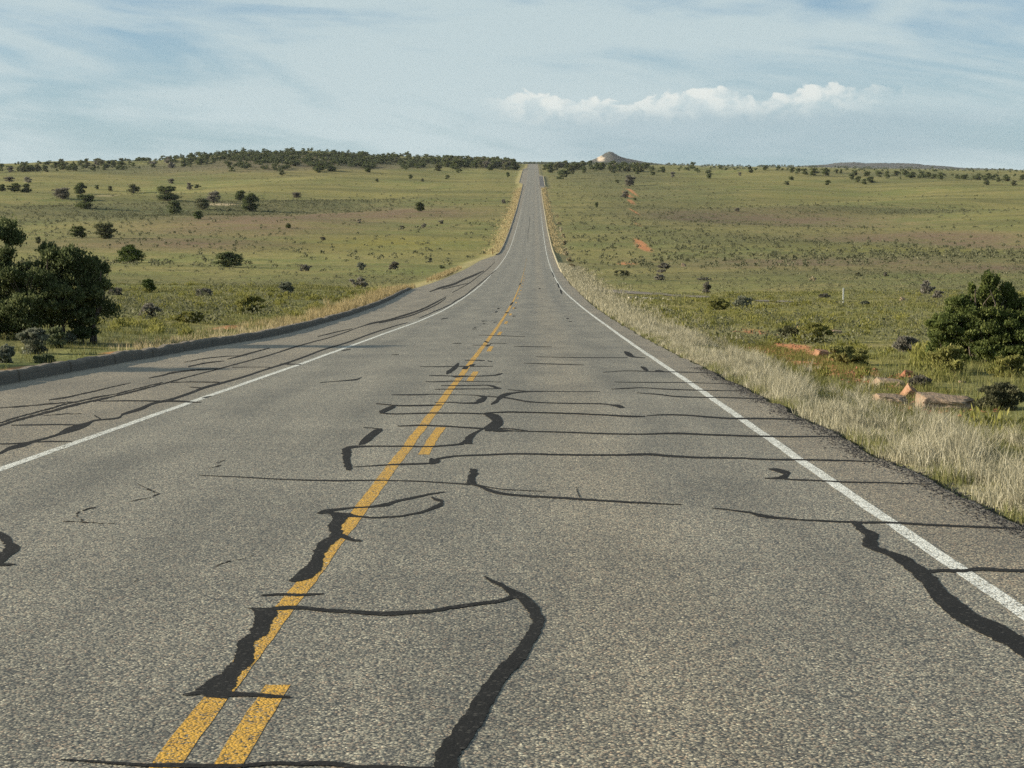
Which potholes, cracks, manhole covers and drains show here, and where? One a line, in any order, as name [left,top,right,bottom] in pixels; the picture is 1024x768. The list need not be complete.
crack [0,263,494,426]
crack [66,507,102,524]
